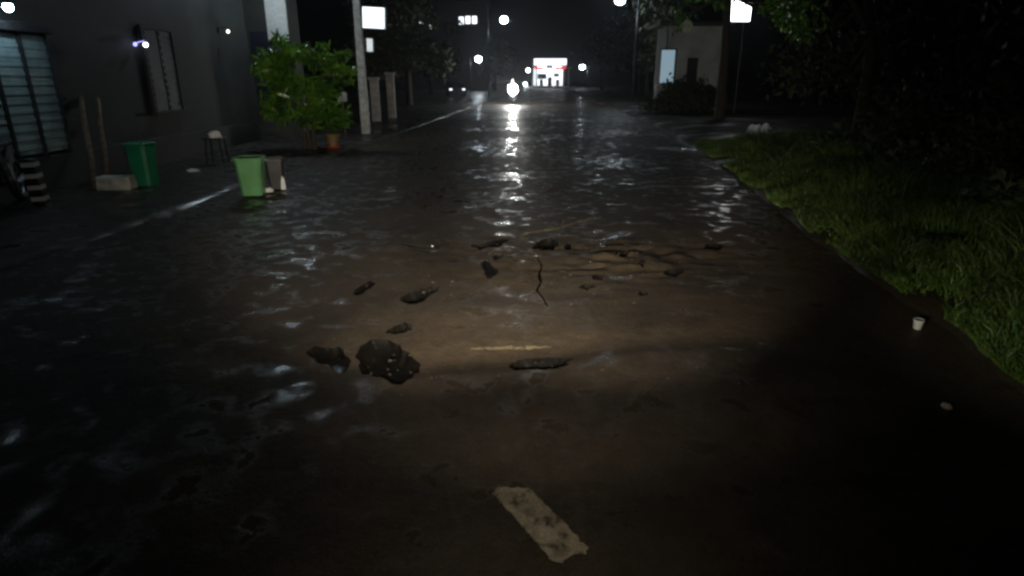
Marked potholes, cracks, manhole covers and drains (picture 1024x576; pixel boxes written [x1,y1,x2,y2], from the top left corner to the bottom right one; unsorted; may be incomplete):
pothole [509,357,573,370]
pothole [532,239,559,251]
pothole [306,346,351,374]
pothole [385,322,413,334]
pothole [355,339,421,385]
pothole [400,287,440,304]
pothole [481,259,499,279]
crack [600,241,658,259]
crack [509,253,548,307]
pothole [353,281,376,296]
